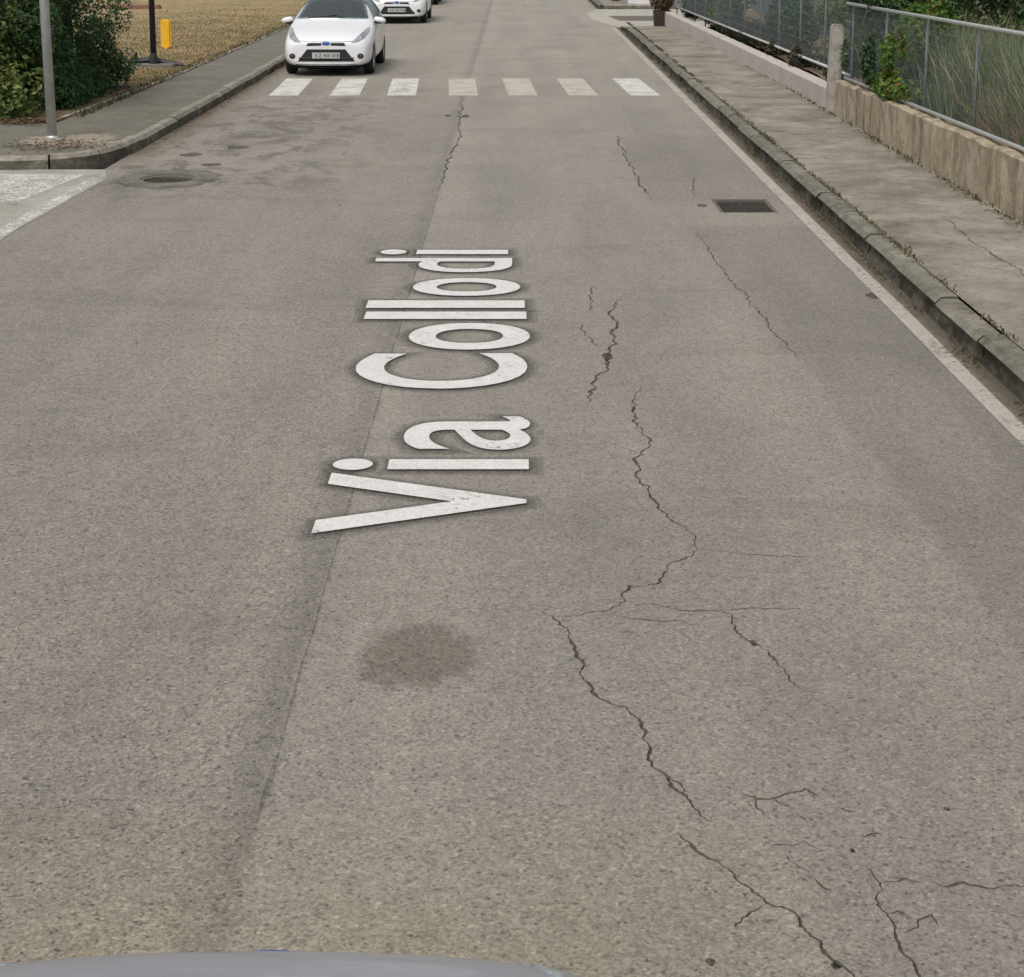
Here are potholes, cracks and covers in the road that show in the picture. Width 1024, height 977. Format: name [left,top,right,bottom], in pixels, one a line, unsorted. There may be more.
crack [580,285,621,403]
crack [939,881,1024,889]
drain grate [712,200,778,213]
crack [697,234,807,364]
crack [944,216,1024,275]
crack [617,136,651,200]
manhole cover [115,169,223,189]
crack [438,97,464,189]
crack [542,386,939,977]
